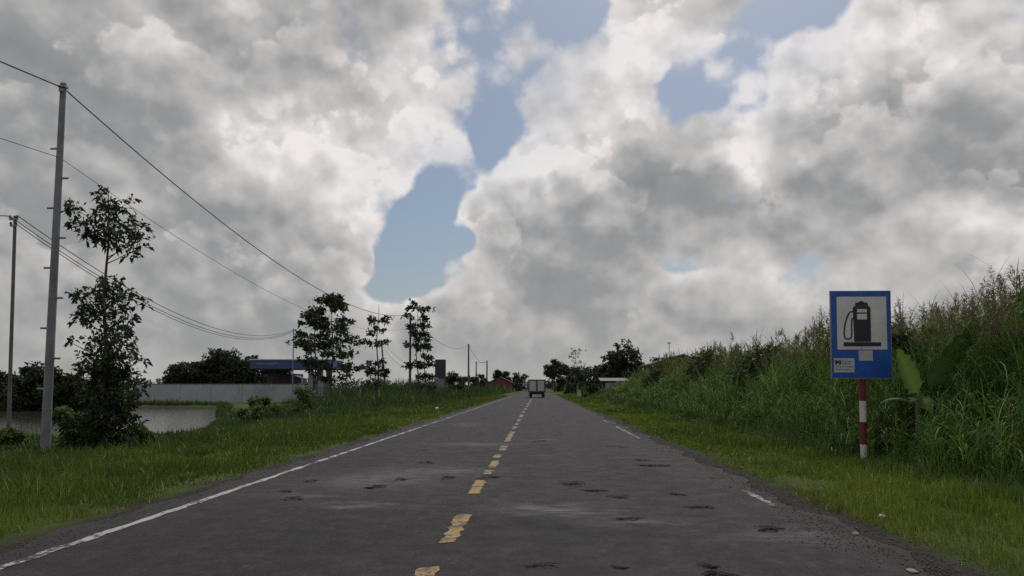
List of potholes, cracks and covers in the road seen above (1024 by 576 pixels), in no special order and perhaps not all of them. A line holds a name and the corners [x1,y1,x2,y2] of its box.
pothole [758,525,786,533]
pothole [516,562,560,570]
